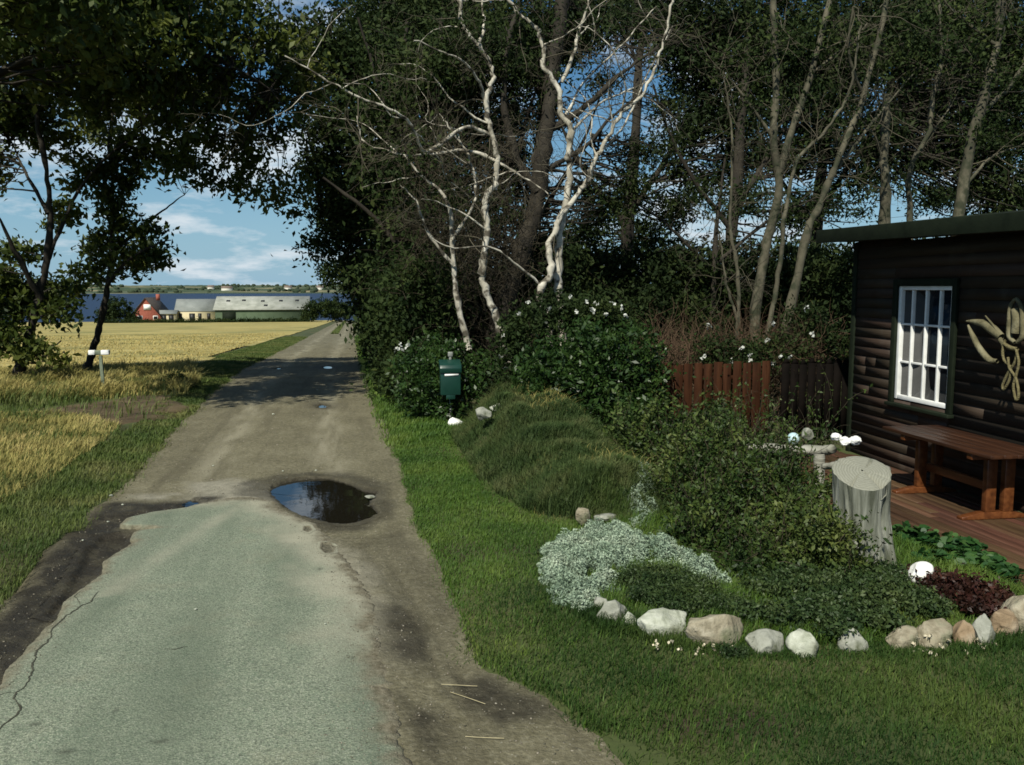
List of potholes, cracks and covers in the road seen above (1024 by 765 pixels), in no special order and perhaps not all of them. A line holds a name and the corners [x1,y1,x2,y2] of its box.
pothole [176,496,208,508]
crack [0,591,99,728]
pothole [258,473,391,527]
